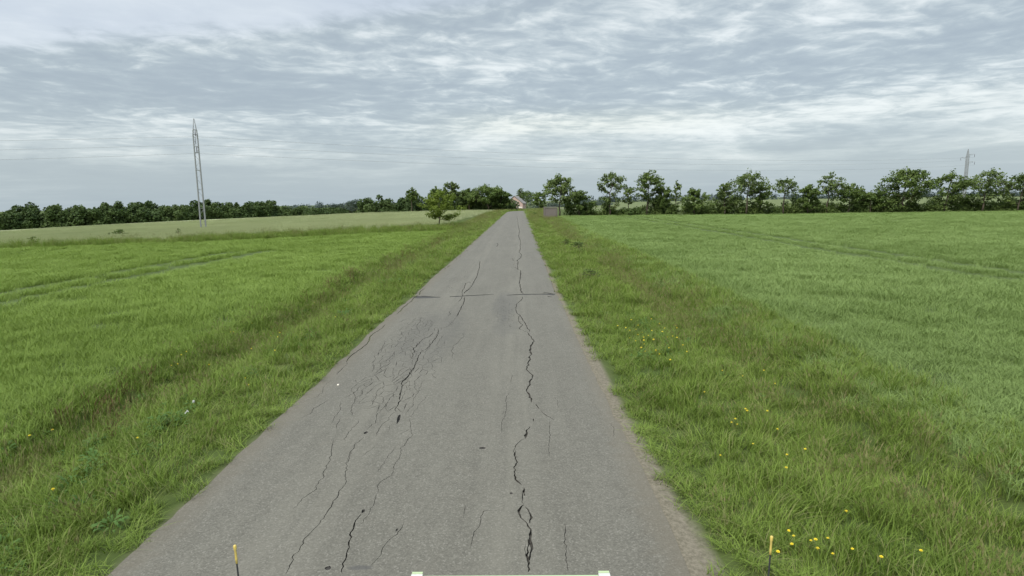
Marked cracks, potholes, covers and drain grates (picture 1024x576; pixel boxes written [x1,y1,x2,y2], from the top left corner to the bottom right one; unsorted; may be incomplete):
crack [497,218,554,572]
crack [286,263,480,573]
